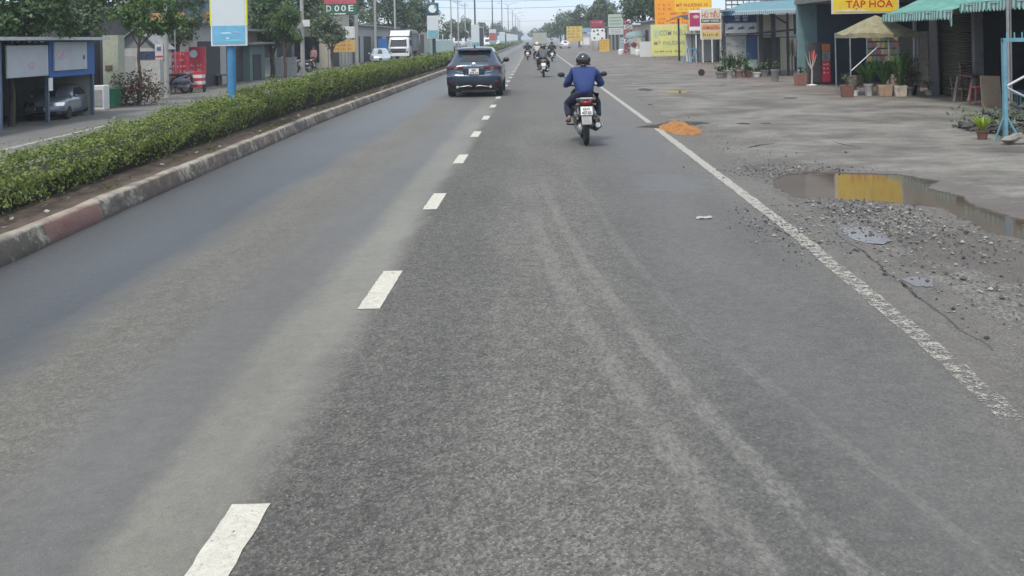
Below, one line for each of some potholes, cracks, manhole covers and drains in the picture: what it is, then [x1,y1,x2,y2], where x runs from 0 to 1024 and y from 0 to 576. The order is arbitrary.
crack [833,230,993,351]
pothole [773,171,1024,234]
